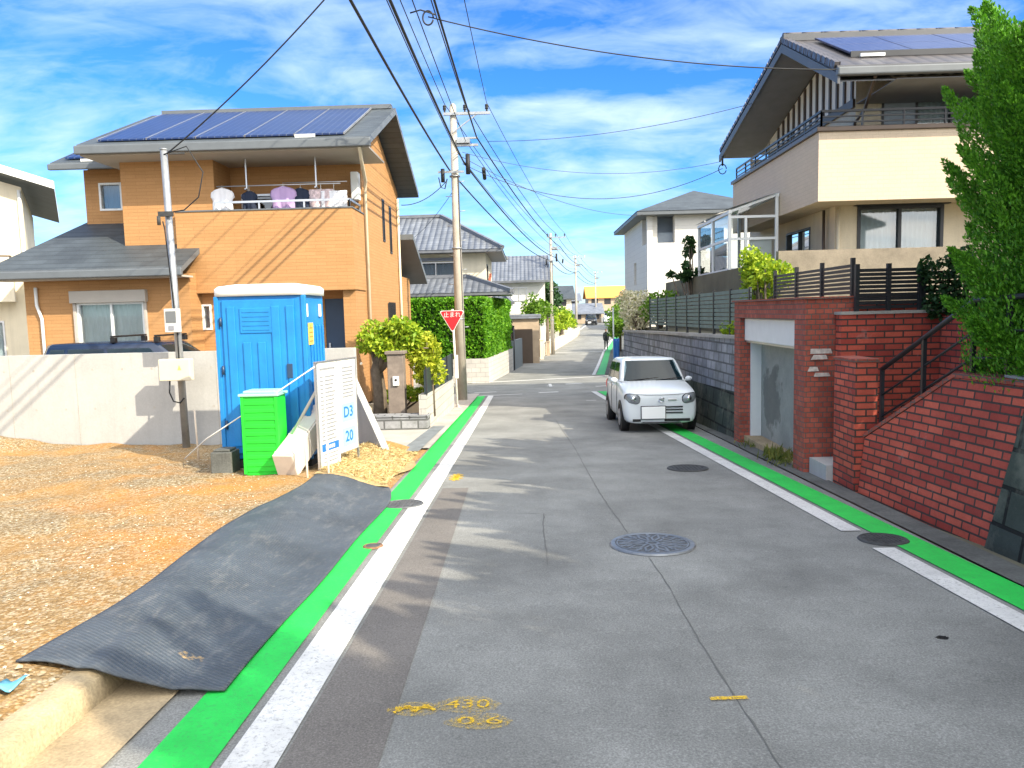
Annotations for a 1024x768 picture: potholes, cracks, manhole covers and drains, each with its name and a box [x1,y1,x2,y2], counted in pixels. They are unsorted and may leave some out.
manhole cover [387,499,424,509]
crack [555,419,782,768]
manhole cover [667,464,709,472]
manhole cover [610,533,696,556]
manhole cover [857,533,910,546]
